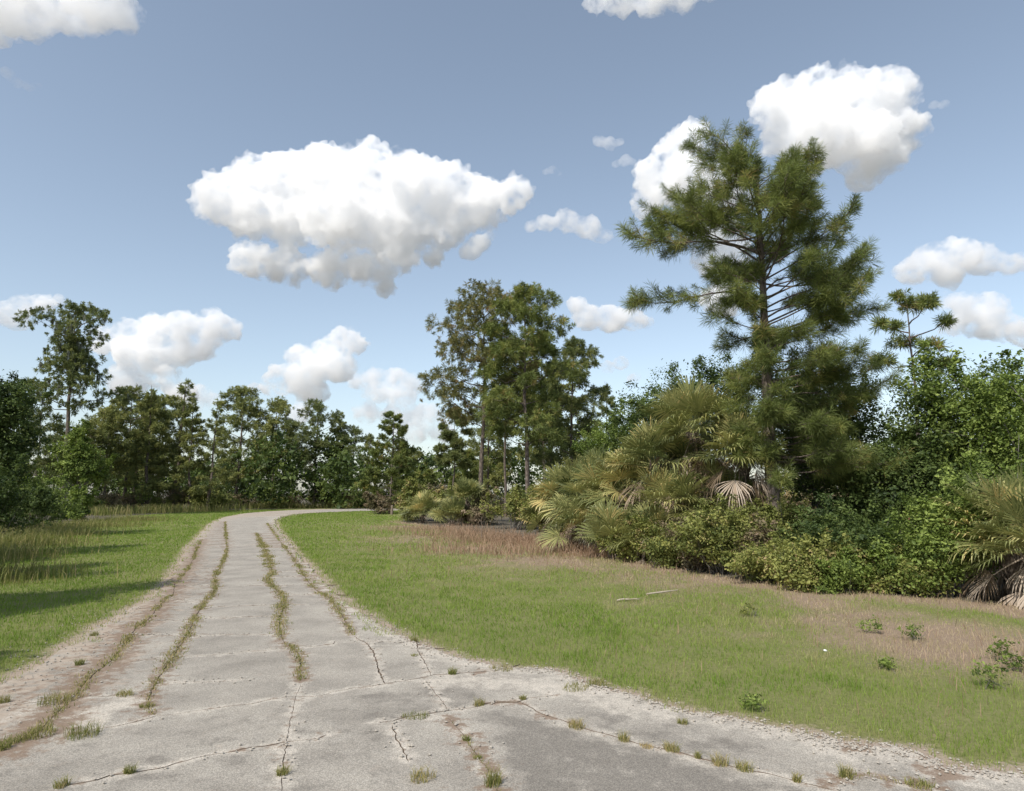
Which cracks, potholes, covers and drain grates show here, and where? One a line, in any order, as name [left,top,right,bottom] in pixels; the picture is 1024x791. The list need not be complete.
crack [379,694,557,790]
crack [65,615,520,789]
crack [135,568,348,662]
